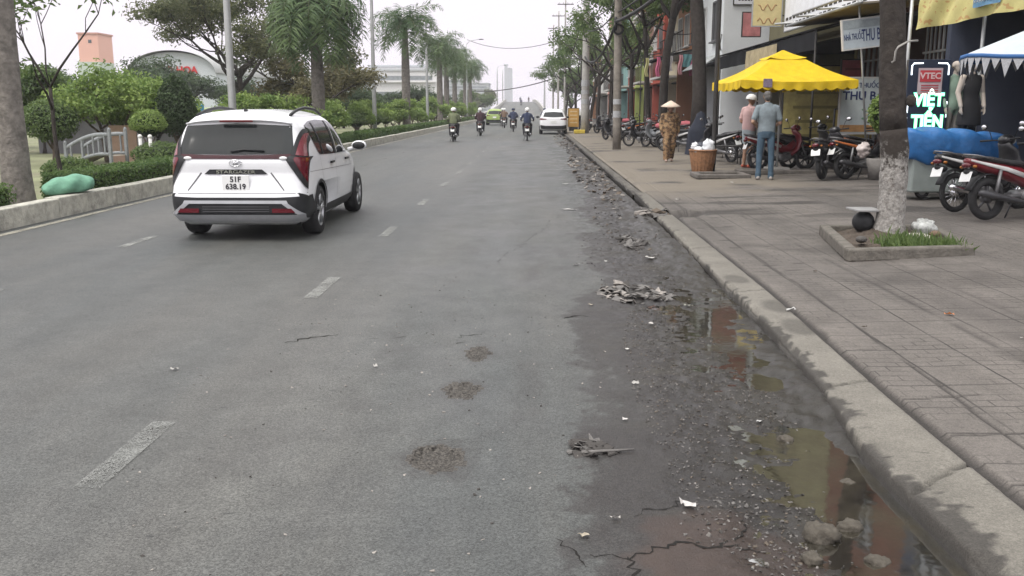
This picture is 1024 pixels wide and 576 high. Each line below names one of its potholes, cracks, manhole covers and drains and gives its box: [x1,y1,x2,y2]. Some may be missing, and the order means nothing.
crack [558,500,761,576]
pothole [405,444,467,474]
pothole [464,346,493,362]
pothole [441,382,484,400]
